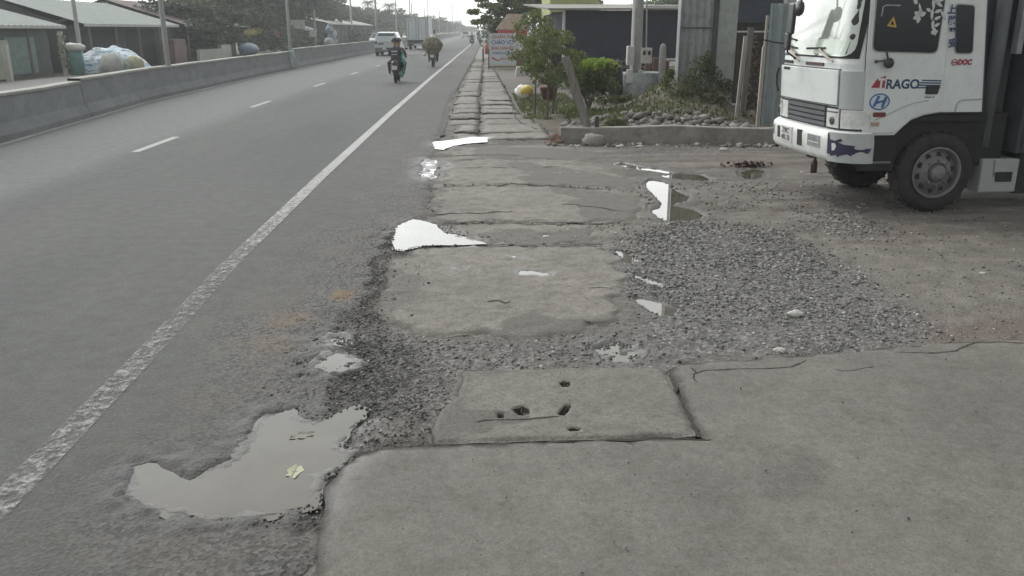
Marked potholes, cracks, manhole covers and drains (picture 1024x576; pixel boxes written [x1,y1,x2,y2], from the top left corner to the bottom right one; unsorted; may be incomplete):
crack [691,359,807,382]
pothole [308,349,370,378]
pothole [124,412,367,521]
crack [910,341,1022,354]
